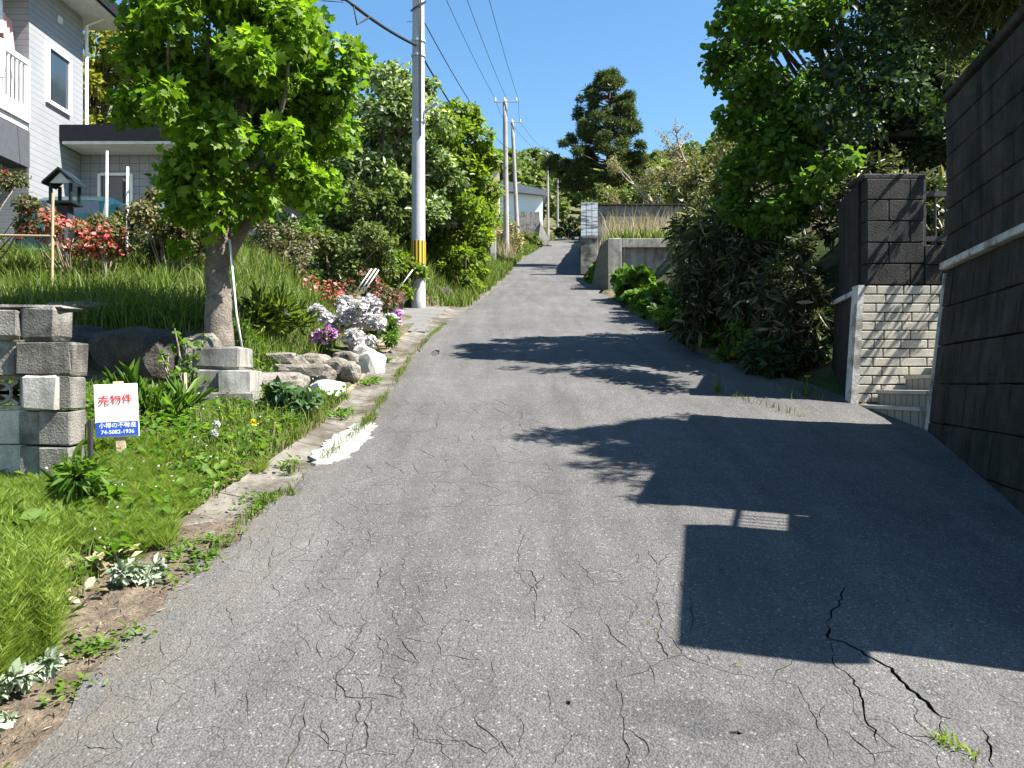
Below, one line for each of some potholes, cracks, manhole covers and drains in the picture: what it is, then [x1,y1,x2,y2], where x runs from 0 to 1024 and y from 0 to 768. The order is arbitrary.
crack [527,549,1016,768]
